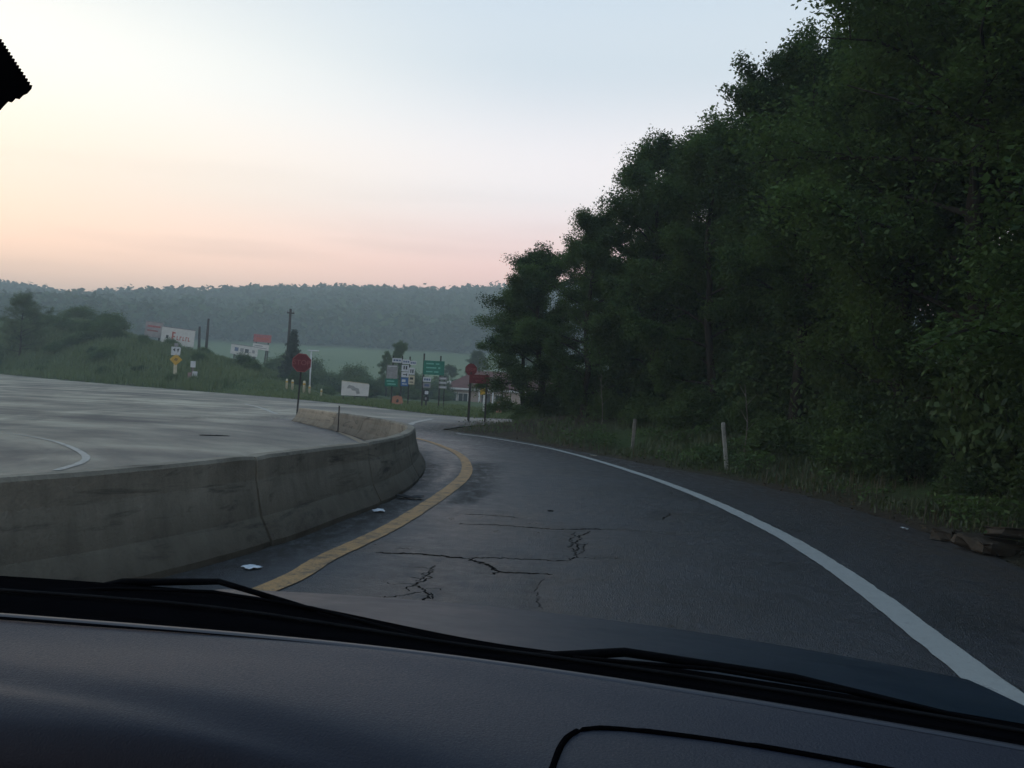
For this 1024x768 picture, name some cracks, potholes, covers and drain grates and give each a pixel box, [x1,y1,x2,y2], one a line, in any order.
crack [375,513,672,609]
